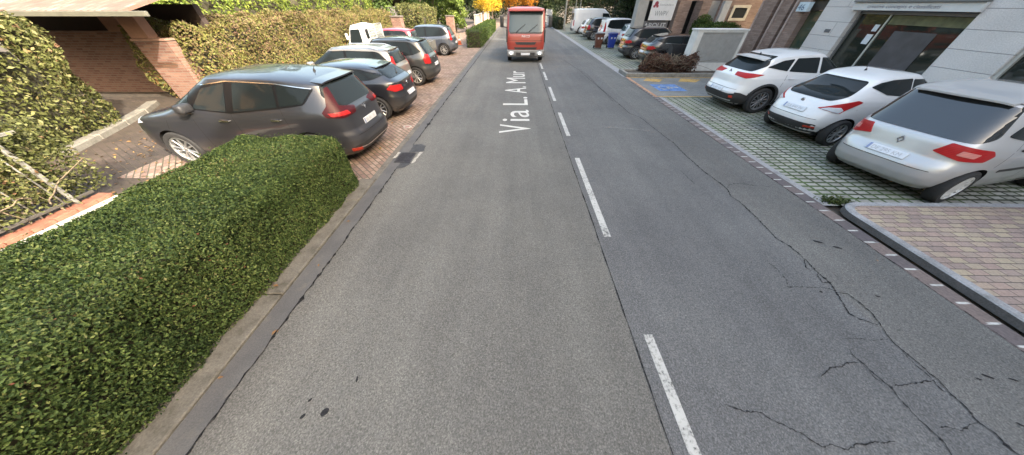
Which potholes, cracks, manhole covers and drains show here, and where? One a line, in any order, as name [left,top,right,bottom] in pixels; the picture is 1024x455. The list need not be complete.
crack [570,64,1024,455]
